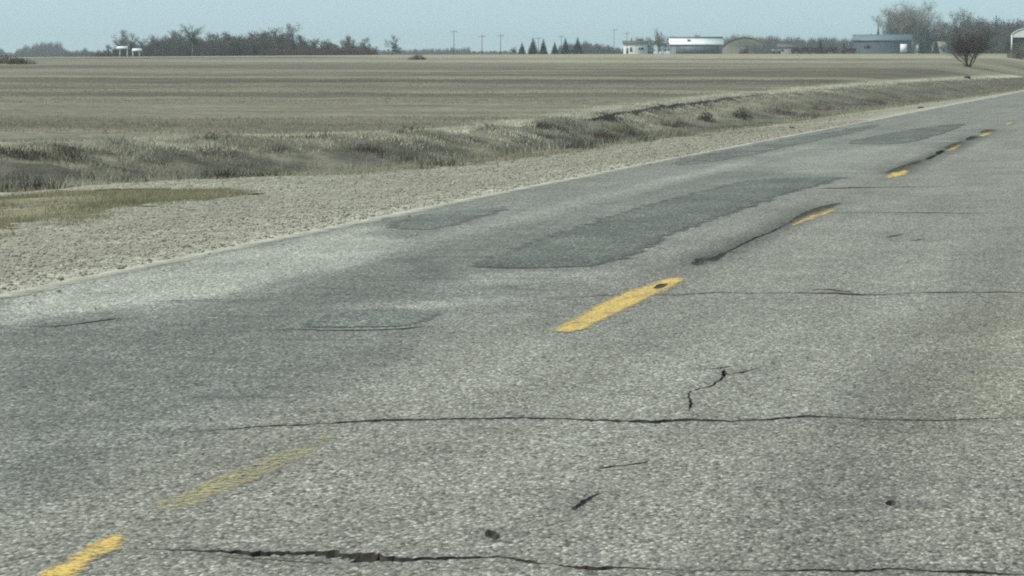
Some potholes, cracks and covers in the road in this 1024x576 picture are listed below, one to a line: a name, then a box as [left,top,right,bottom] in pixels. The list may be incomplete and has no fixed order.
crack [40,318,119,327]
crack [140,548,1024,575]
crack [568,289,1024,298]
crack [171,366,998,434]
